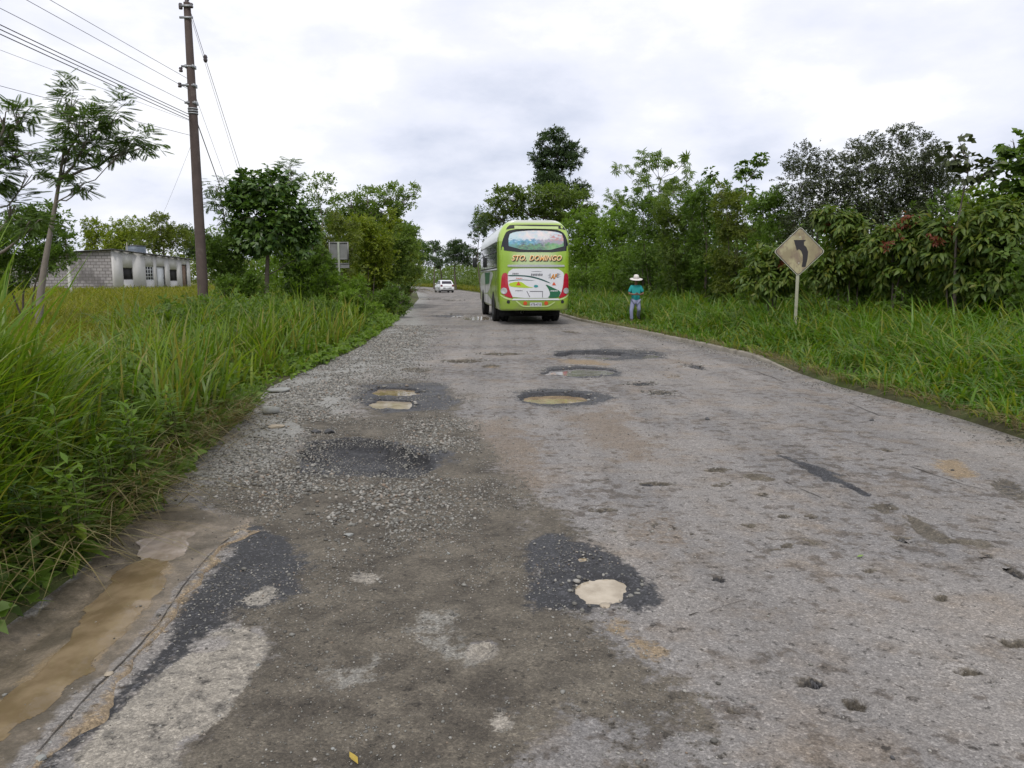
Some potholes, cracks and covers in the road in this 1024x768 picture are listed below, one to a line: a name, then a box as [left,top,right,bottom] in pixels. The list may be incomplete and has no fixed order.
pothole [552,567,652,612]
pothole [359,385,430,398]
pothole [509,390,603,406]
pothole [286,436,443,481]
pothole [546,349,647,360]
pothole [356,398,429,412]
pothole [530,366,627,378]
